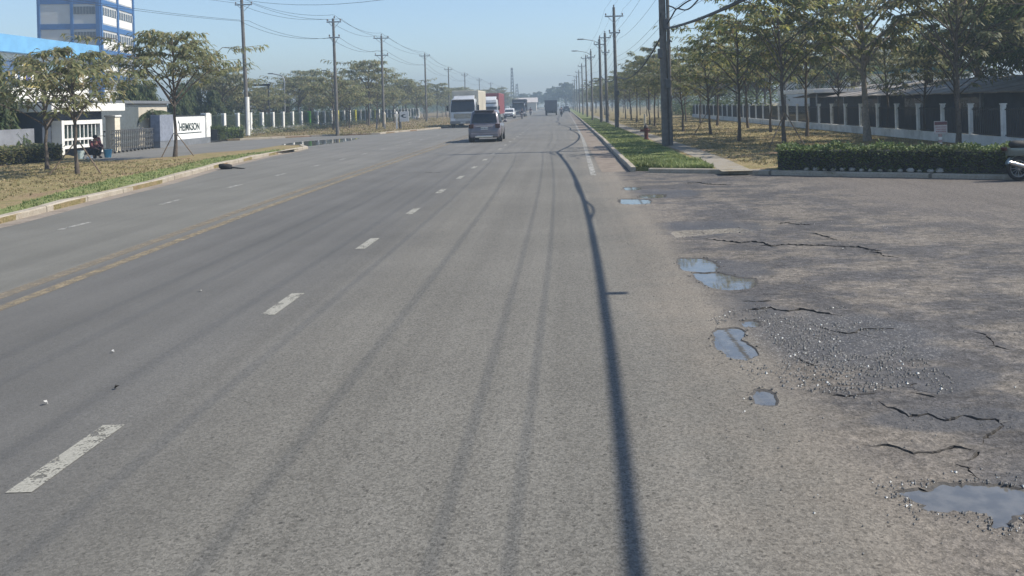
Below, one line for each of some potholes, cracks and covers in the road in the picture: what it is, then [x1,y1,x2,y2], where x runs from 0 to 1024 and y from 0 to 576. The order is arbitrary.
crack [743,300,896,338]
pothole [687,271,764,290]
pothole [674,256,724,273]
crack [974,331,1010,350]
crack [702,222,898,258]
pothole [747,386,779,406]
pothole [708,325,759,363]
pothole [895,479,1024,529]
crack [831,383,1009,480]
